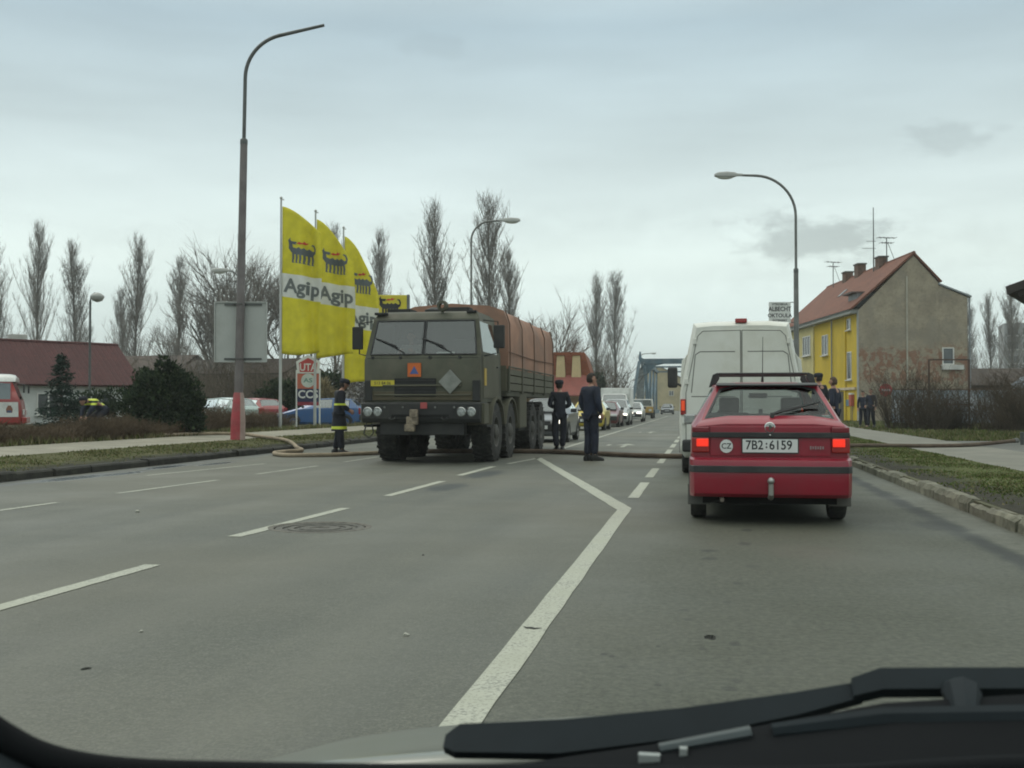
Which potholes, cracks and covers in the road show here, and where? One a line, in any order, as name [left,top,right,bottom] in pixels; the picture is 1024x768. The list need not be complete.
manhole cover [268,521,372,533]
